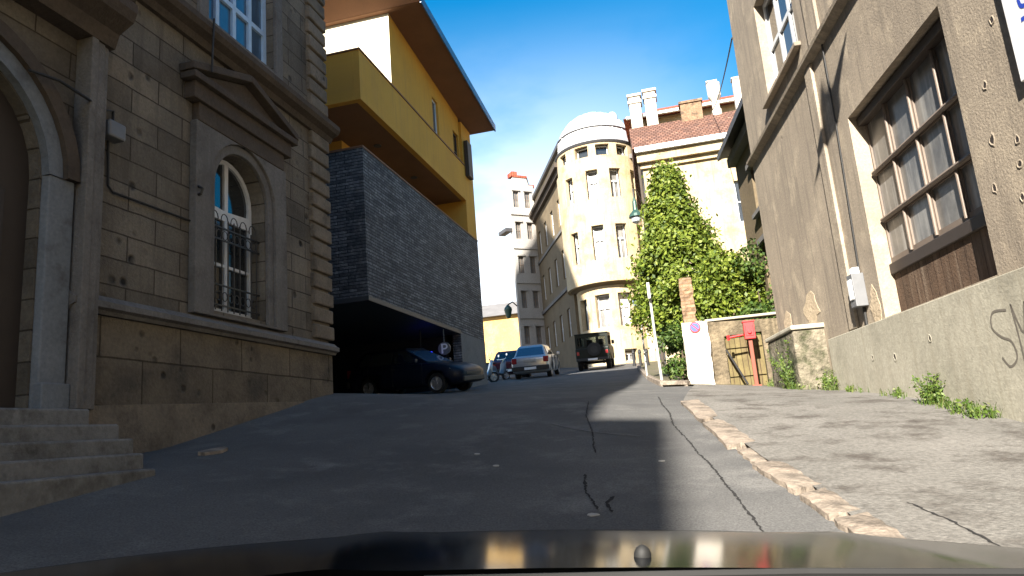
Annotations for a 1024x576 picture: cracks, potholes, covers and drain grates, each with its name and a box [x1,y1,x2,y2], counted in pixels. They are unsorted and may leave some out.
crack [658,397,764,532]
crack [583,474,615,512]
crack [585,401,596,453]
crack [908,502,1000,546]
